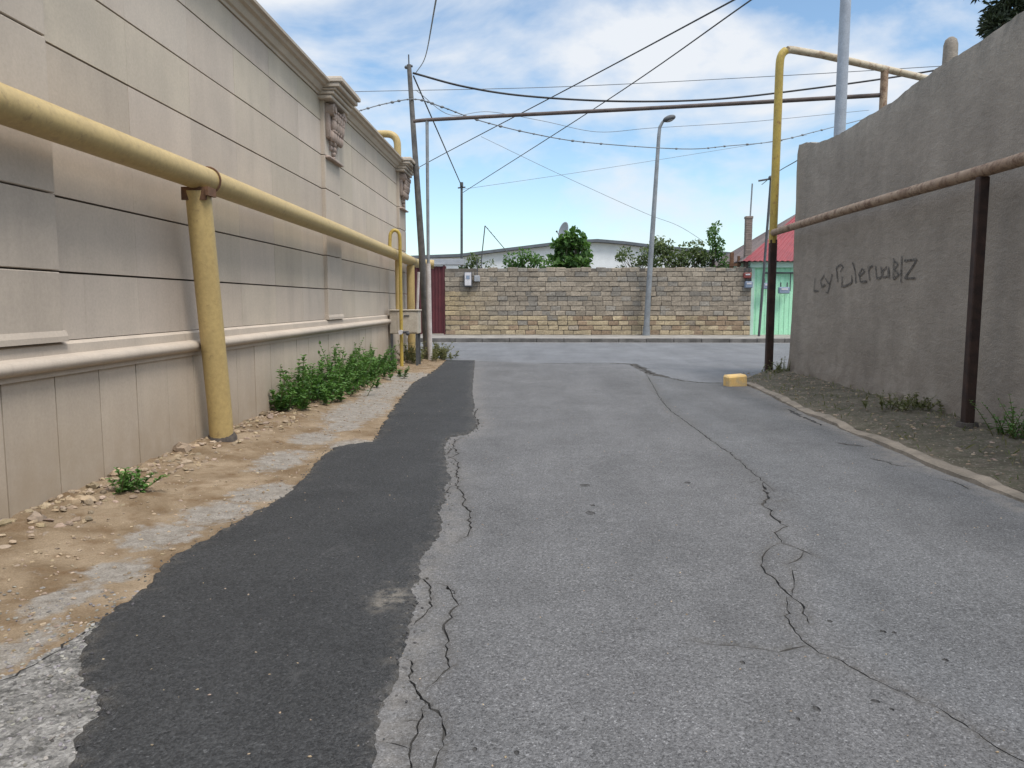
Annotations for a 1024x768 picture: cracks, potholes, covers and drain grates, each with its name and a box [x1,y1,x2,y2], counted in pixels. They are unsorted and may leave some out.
crack [646,375,1024,762]
crack [386,579,459,768]
crack [616,363,706,383]
crack [446,409,480,543]
